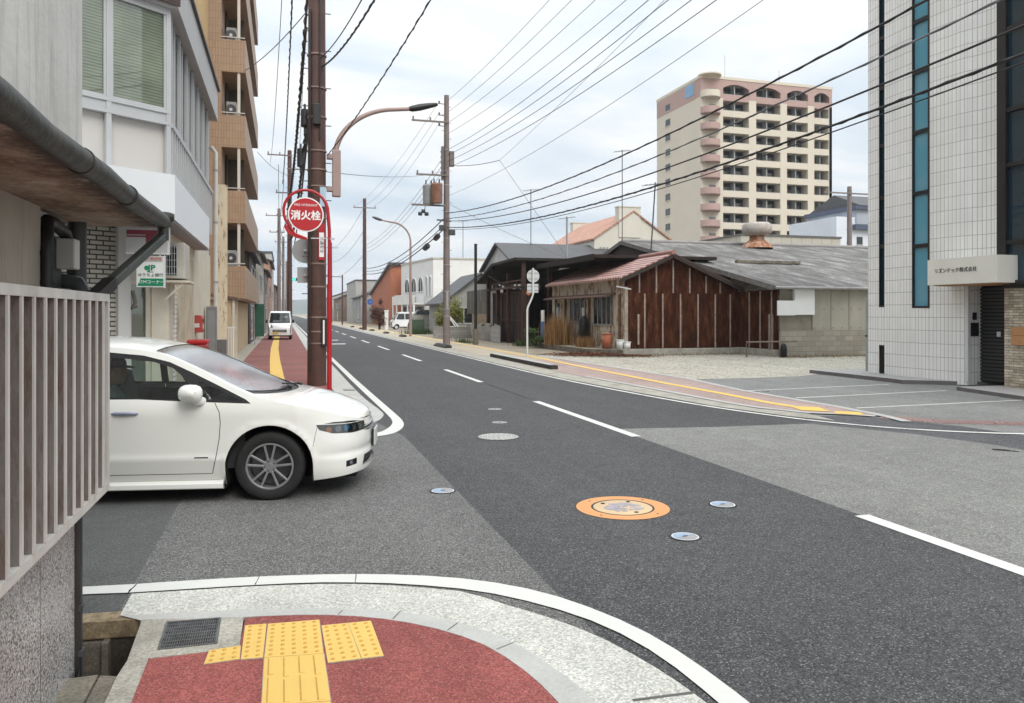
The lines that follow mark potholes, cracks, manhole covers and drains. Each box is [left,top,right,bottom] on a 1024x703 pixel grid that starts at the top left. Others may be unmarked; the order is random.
utility cover [669,532,702,541]
drain grate [157,617,221,650]
manhole cover [576,496,670,520]
